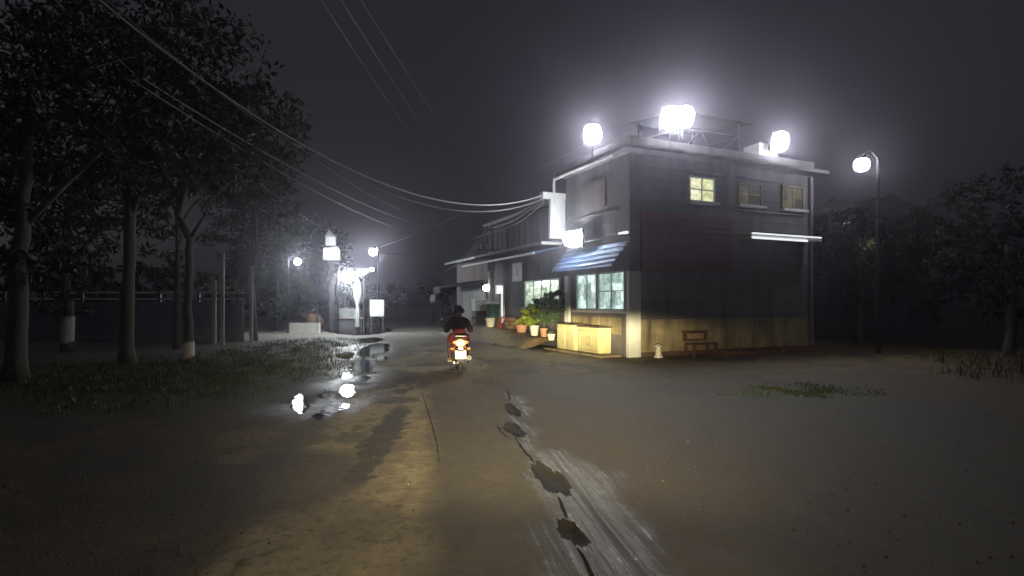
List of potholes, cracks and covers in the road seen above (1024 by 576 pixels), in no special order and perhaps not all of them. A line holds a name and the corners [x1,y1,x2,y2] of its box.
pothole [531,460,573,497]
crack [497,390,595,576]
pothole [556,518,592,547]
pothole [504,402,521,417]
pothole [502,421,527,438]
